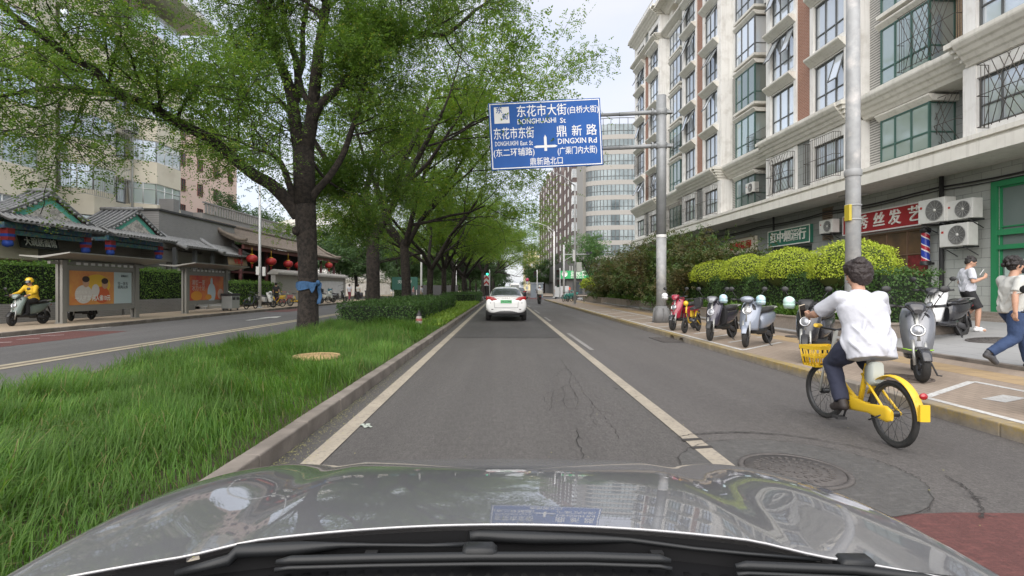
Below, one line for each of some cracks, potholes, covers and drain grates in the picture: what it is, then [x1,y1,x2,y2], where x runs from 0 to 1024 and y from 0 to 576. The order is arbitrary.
manhole cover [738,453,855,490]
crack [543,364,619,438]
crack [677,431,996,519]
